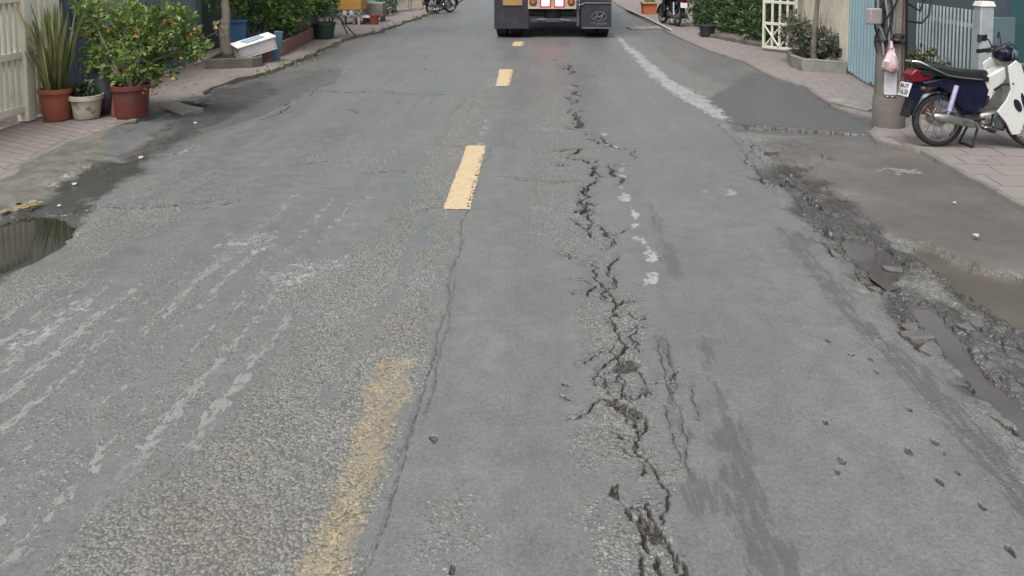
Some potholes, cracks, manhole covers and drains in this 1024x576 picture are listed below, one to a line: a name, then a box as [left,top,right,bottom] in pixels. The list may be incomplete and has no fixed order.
pothole [897,238,1024,337]
pothole [755,148,786,157]
pothole [833,232,911,291]
pothole [846,269,914,303]
crack [484,59,703,576]
crack [42,198,247,218]
